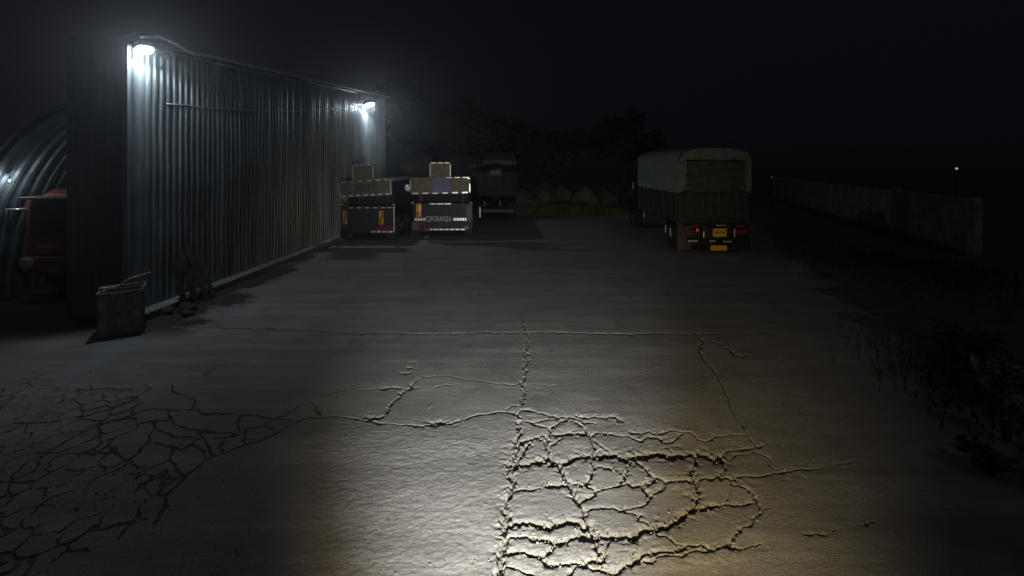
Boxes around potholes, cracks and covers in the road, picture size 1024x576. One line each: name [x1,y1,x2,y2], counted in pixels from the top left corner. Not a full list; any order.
crack [0,335,876,576]
